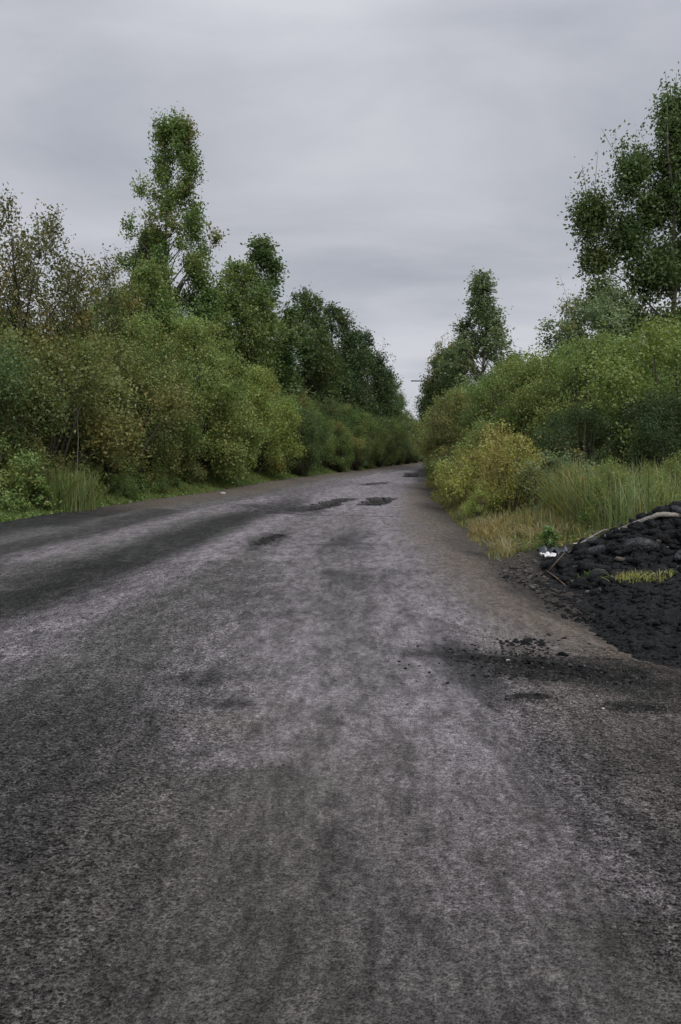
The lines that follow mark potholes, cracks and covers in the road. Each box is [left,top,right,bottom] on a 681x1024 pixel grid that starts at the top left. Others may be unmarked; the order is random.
pothole [505,690,557,703]
pothole [353,497,398,507]
pothole [604,701,670,713]
pothole [248,534,289,547]
pothole [293,498,363,511]
